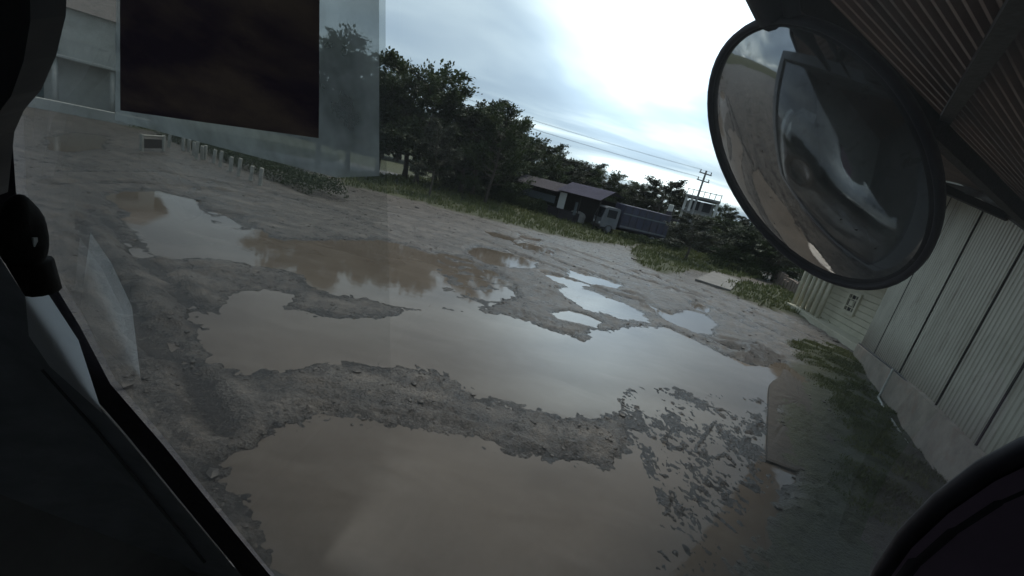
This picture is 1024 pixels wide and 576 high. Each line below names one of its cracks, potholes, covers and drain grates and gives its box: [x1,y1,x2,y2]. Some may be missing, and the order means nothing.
pothole [264,395,796,576]
pothole [559,282,650,323]
pothole [102,191,516,307]
pothole [515,242,554,255]
pothole [167,289,809,419]
pothole [466,247,542,268]
